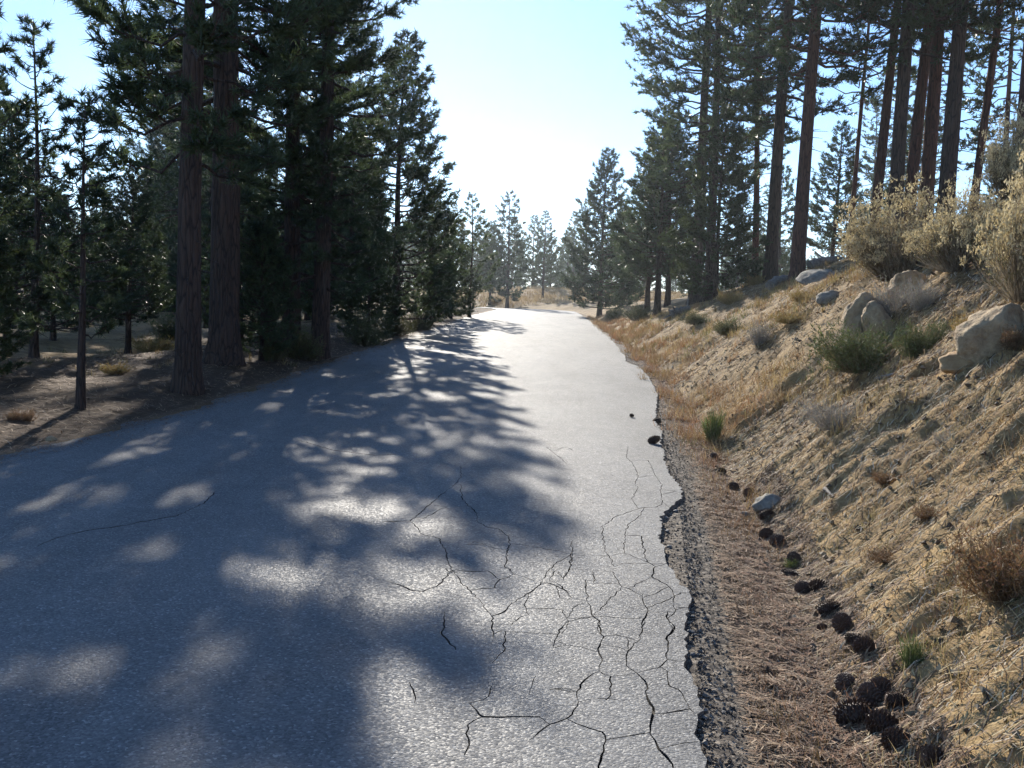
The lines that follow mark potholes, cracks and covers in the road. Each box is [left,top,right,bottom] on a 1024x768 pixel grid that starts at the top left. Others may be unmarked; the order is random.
crack [40,493,214,545]
crack [377,447,698,768]
